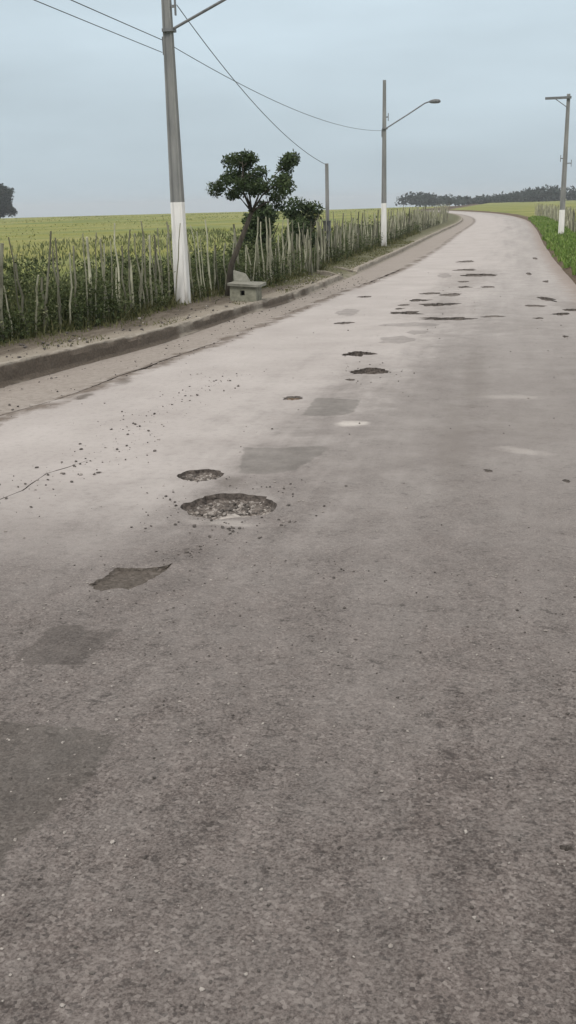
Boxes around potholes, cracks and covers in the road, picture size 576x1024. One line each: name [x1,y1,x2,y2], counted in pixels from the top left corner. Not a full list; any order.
pothole [180,493,277,520]
pothole [177,469,224,482]
crack [1,461,85,499]
